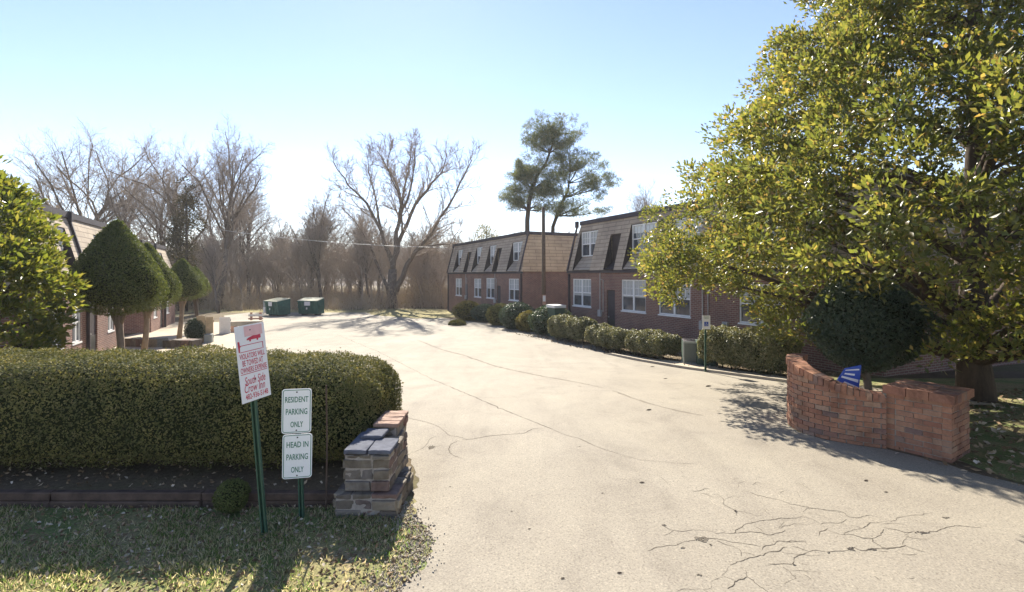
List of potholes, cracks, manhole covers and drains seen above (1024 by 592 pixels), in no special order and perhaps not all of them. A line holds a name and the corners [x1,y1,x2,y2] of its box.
crack [646,460,981,592]
crack [339,335,636,459]
